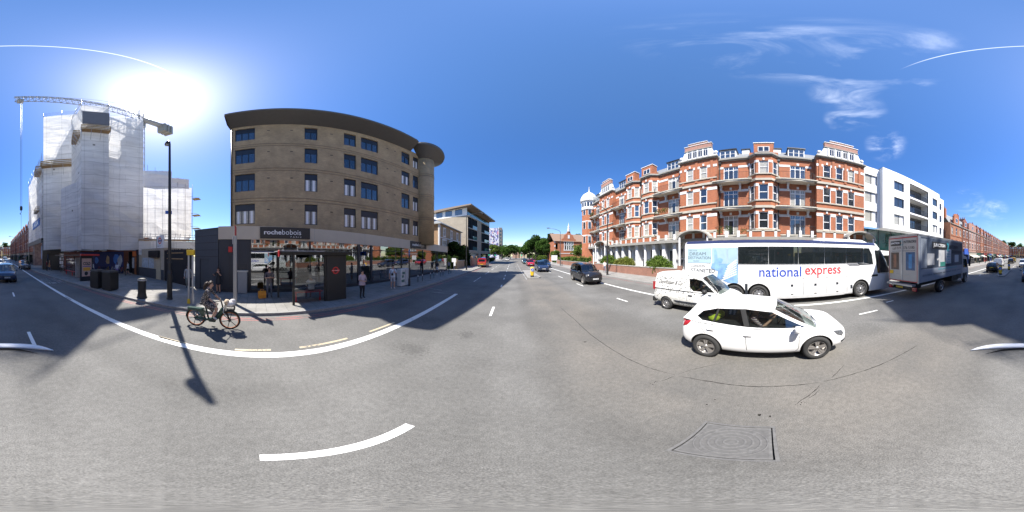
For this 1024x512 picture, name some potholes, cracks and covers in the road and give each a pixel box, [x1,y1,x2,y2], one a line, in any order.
manhole cover [665,421,781,462]
